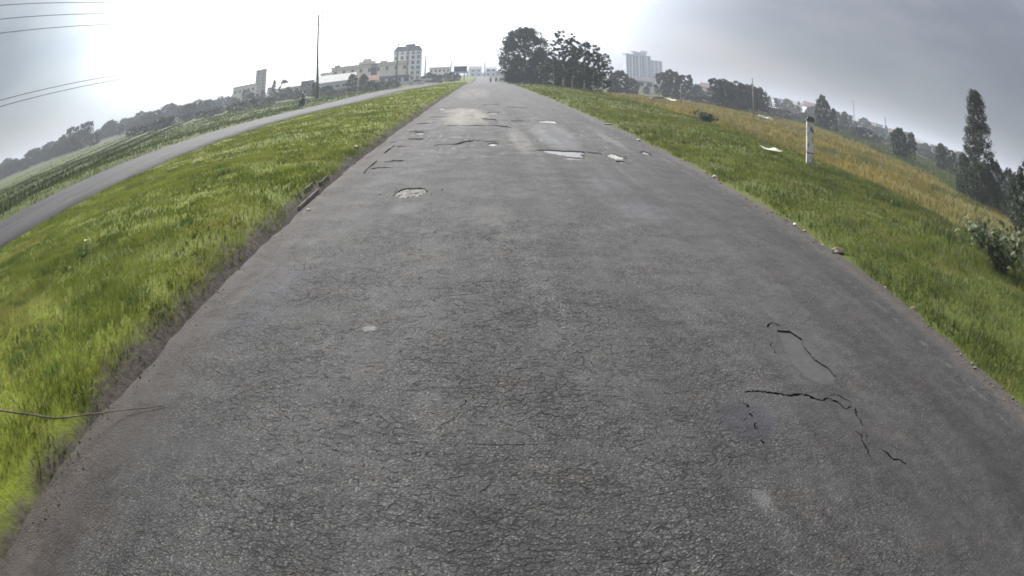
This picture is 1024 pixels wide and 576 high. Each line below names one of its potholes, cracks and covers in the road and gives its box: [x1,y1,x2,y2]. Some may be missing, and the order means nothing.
crack [363,107,521,174]
pothole [394,188,427,198]
pothole [777,330,835,385]
crack [93,201,868,576]
pothole [538,150,585,159]
crack [727,390,906,464]
